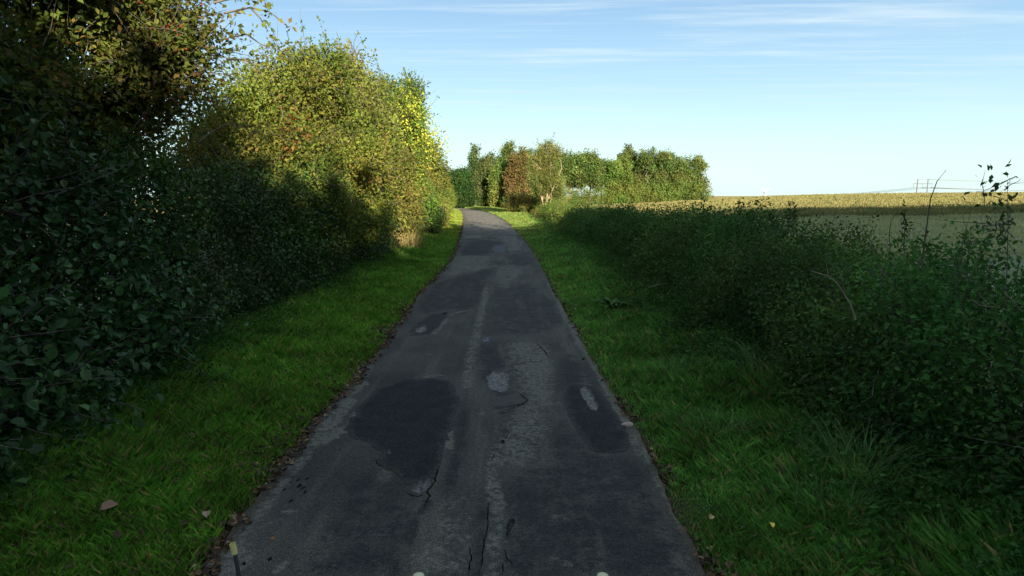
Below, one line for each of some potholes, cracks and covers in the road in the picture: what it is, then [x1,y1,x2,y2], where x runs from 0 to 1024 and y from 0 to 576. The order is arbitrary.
crack [491,342,551,461]
crack [408,468,438,506]
pothole [580,386,599,411]
pothole [486,371,512,392]
